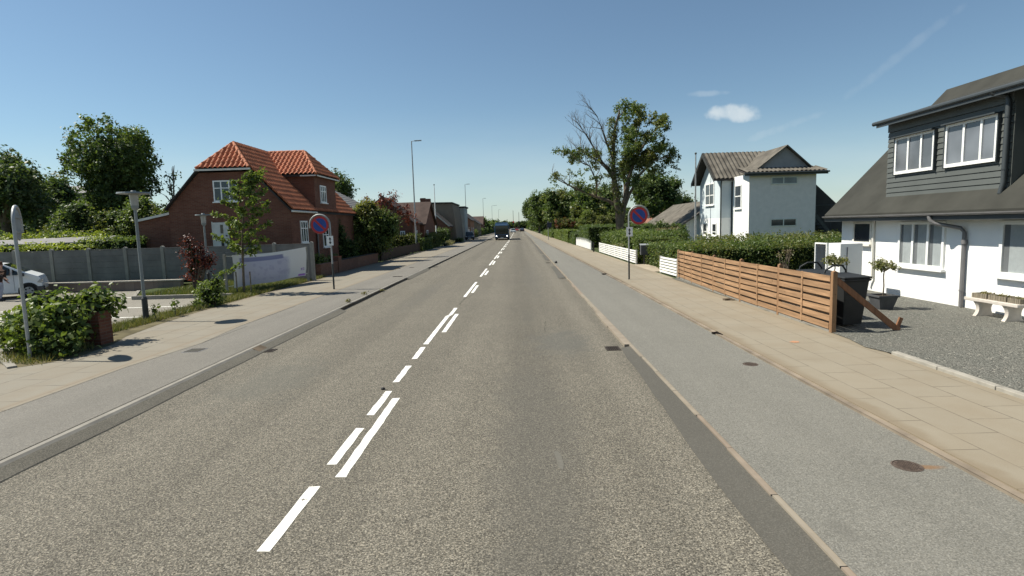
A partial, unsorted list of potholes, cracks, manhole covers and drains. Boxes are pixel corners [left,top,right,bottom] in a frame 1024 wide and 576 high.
manhole cover [890,460,924,472]
